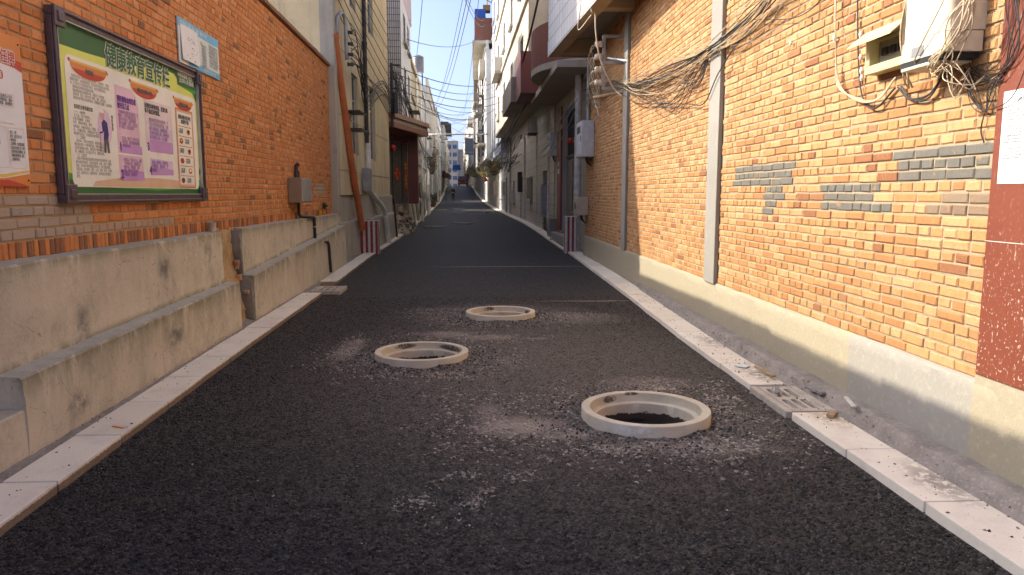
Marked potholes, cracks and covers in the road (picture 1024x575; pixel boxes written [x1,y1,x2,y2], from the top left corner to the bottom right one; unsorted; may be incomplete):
manhole cover [581,391,711,438]
manhole cover [466,306,535,321]
manhole cover [375,341,468,369]
